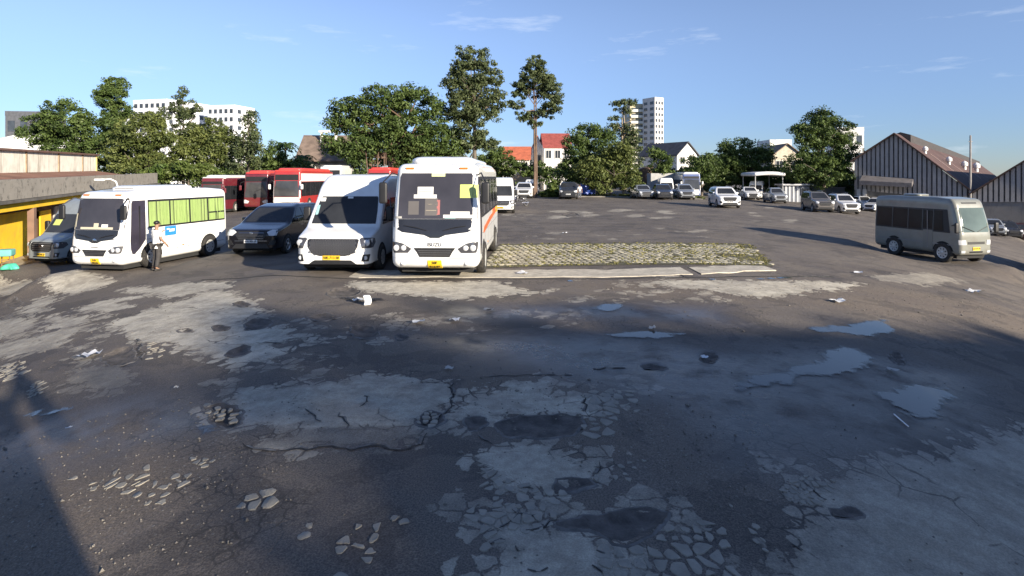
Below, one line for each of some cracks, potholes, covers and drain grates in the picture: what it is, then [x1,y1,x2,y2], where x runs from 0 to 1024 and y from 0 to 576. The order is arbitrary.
pothole [493,413,587,440]
pothole [201,401,246,430]
pothole [640,363,669,371]
pothole [699,351,720,364]
pothole [552,506,671,548]
crack [242,382,457,451]
pothole [551,477,599,495]
pothole [224,344,252,358]
crack [779,474,836,507]
crack [592,504,741,576]
crack [463,468,567,552]
crack [593,458,647,483]
